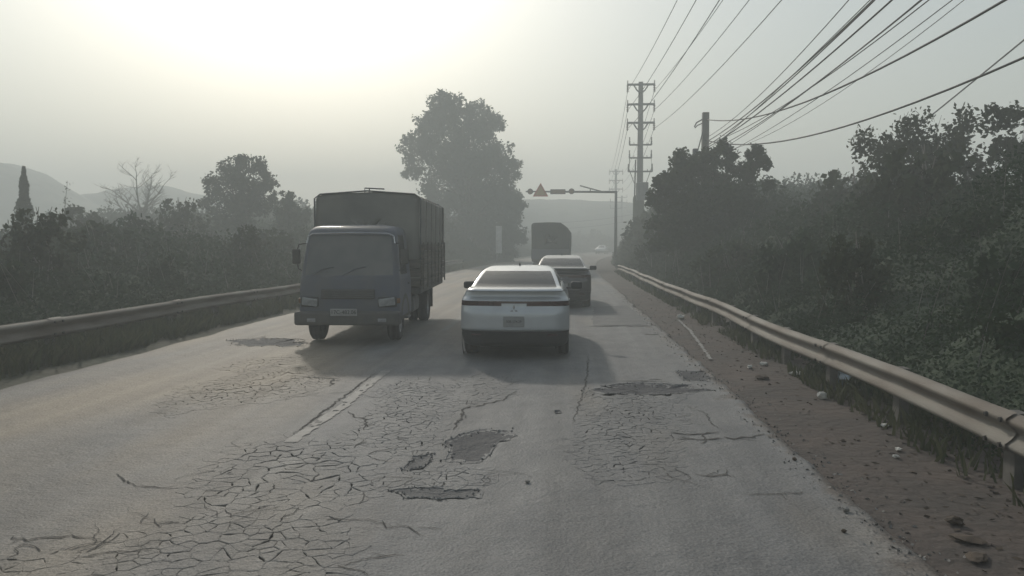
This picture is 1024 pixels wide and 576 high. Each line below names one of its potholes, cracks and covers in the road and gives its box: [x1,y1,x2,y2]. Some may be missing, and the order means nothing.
pothole [675,370,716,381]
pothole [388,485,484,501]
pothole [400,452,436,472]
pothole [224,336,318,347]
crack [0,353,765,576]
pothole [439,427,518,464]
pothole [581,382,716,395]
